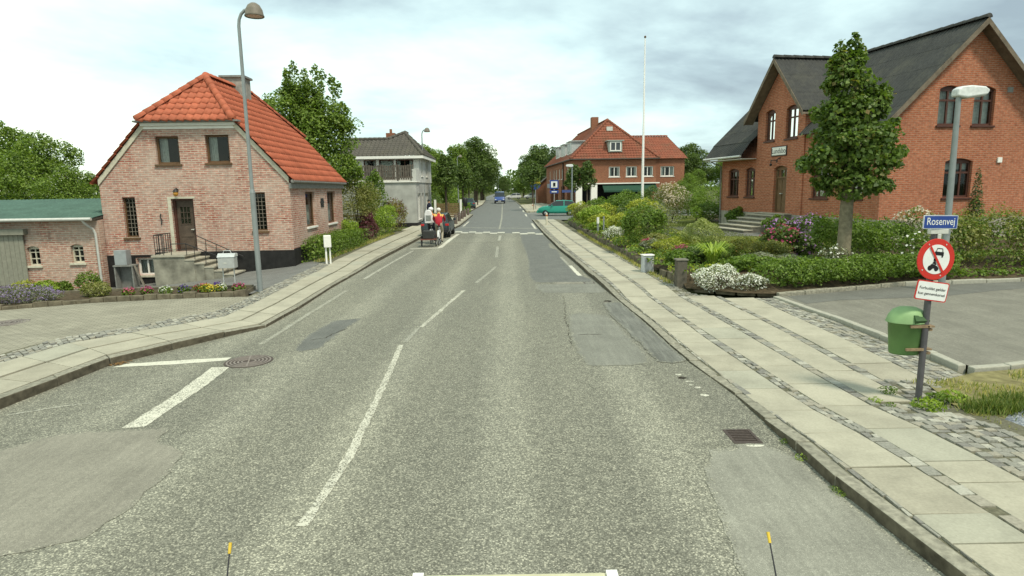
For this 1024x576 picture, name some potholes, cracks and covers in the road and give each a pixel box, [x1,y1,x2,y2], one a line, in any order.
drain grate [722,429,763,444]
manhole cover [223,355,273,368]
